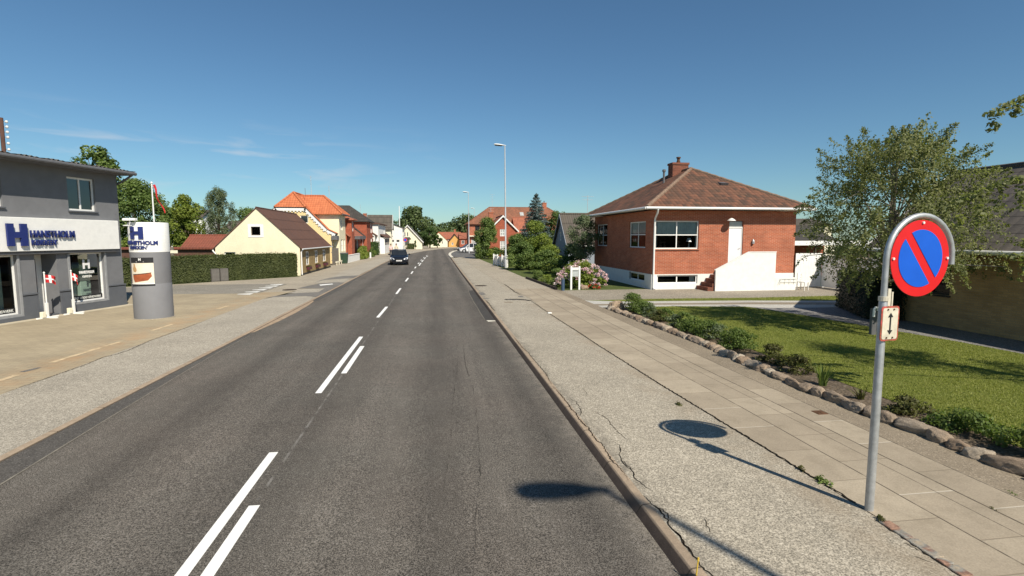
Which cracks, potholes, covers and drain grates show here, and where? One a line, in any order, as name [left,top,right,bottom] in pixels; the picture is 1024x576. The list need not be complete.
crack [438,340,481,562]
crack [556,389,713,576]
